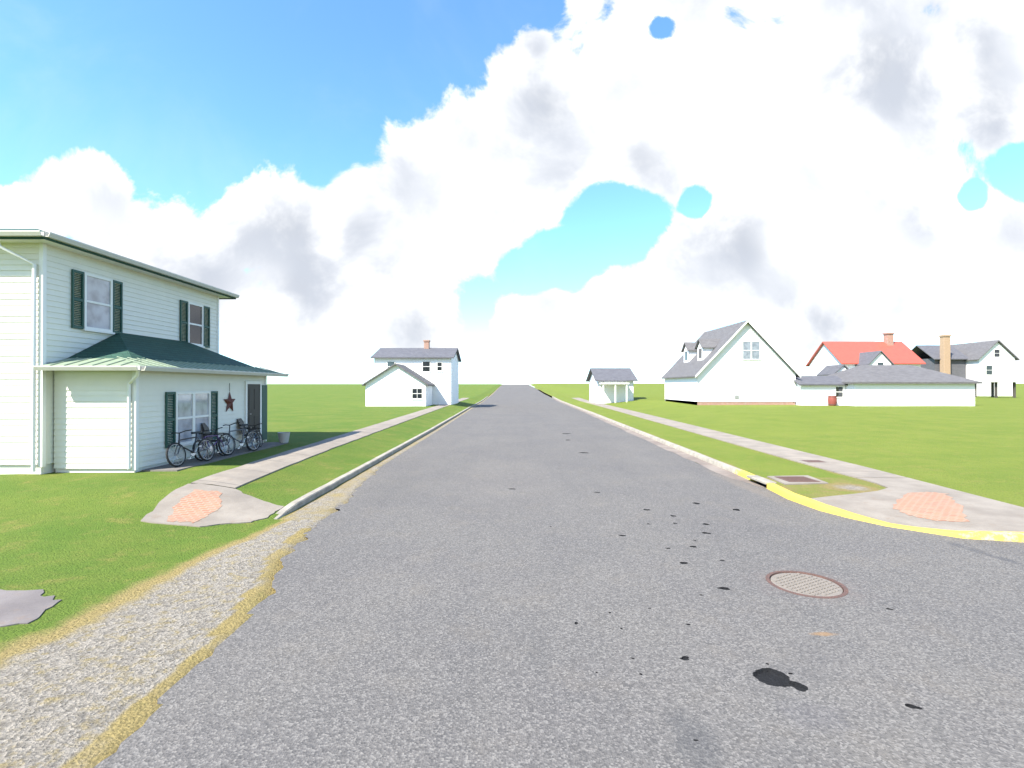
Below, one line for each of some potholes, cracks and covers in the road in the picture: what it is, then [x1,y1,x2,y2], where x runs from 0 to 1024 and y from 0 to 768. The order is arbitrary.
manhole cover [766,570,848,599]
